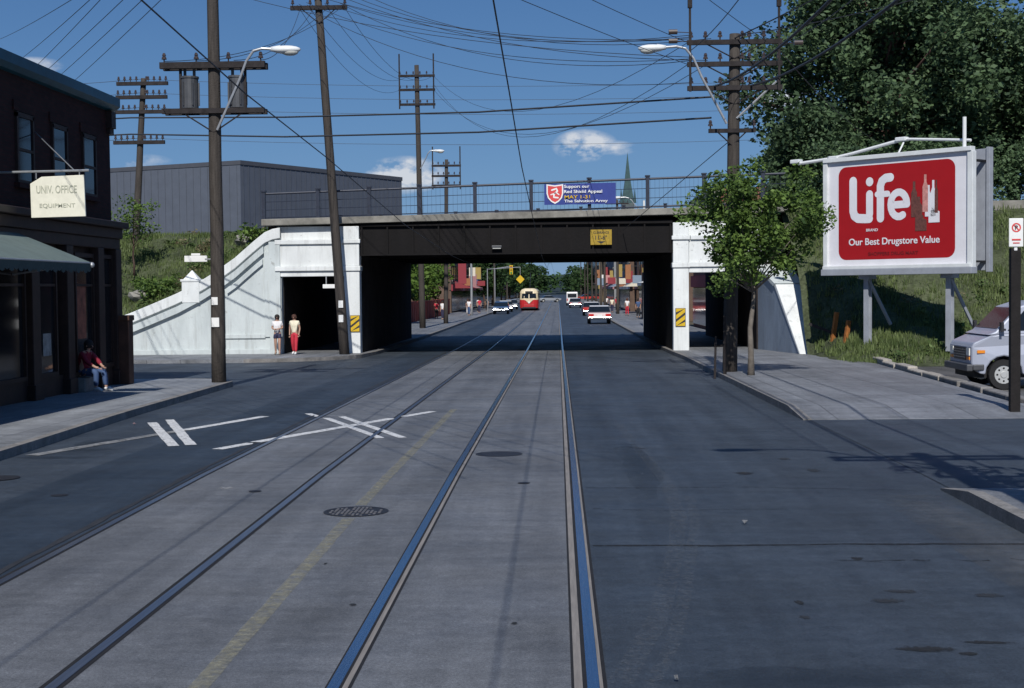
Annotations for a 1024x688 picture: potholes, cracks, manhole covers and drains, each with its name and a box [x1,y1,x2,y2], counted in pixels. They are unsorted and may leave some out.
manhole cover [323,506,389,516]
